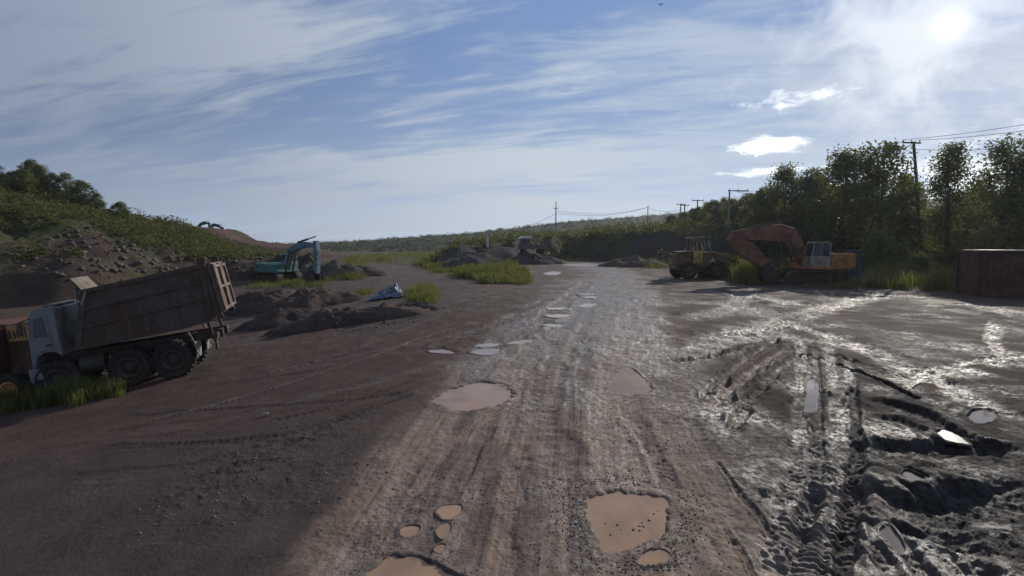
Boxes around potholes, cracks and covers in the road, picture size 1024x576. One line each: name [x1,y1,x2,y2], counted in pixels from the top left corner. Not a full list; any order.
pothole [433,542,448,554]
pothole [603,364,659,399]
pothole [420,378,521,415]
pothole [398,523,423,539]
pothole [575,484,681,563]
pothole [434,503,465,522]
pothole [352,549,475,576]
pothole [467,347,505,356]
pothole [434,521,454,540]
